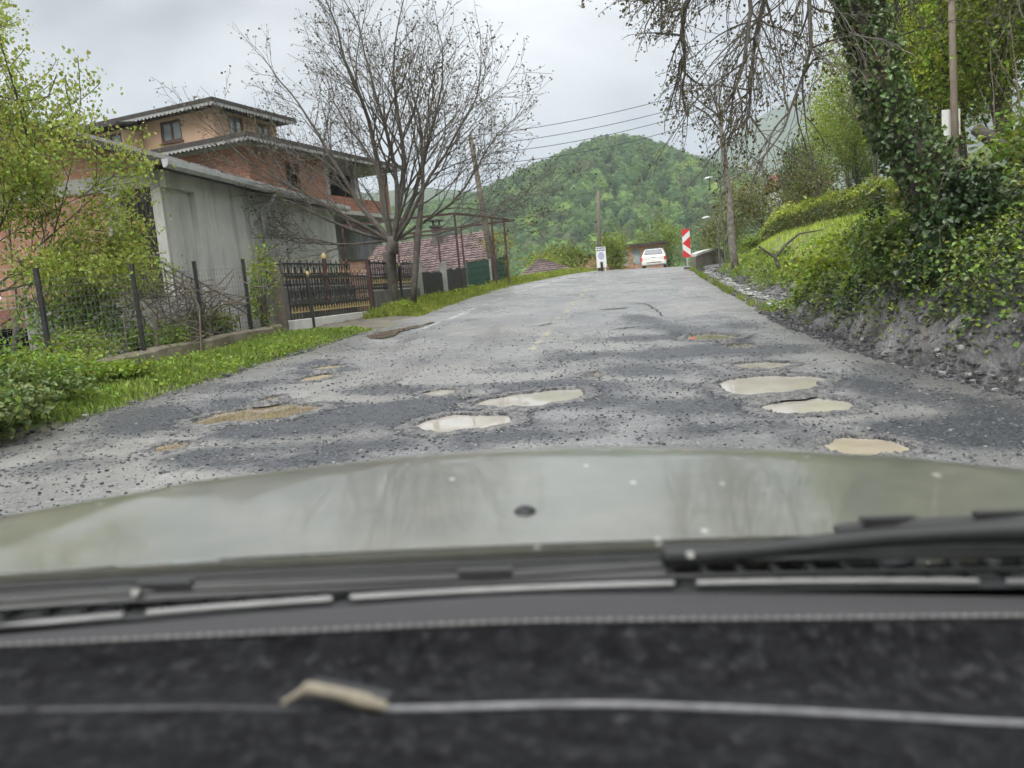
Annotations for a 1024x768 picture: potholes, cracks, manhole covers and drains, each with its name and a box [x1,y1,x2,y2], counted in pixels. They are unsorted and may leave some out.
pothole [802,431,938,458]
pothole [174,399,337,429]
pothole [741,394,874,418]
pothole [701,372,841,403]
pothole [412,386,471,399]
pothole [284,372,344,383]
pothole [677,332,751,344]
pothole [457,385,598,411]
pothole [721,359,807,374]
pothole [397,409,528,438]
pothole [304,362,356,374]
pothole [139,438,202,455]
